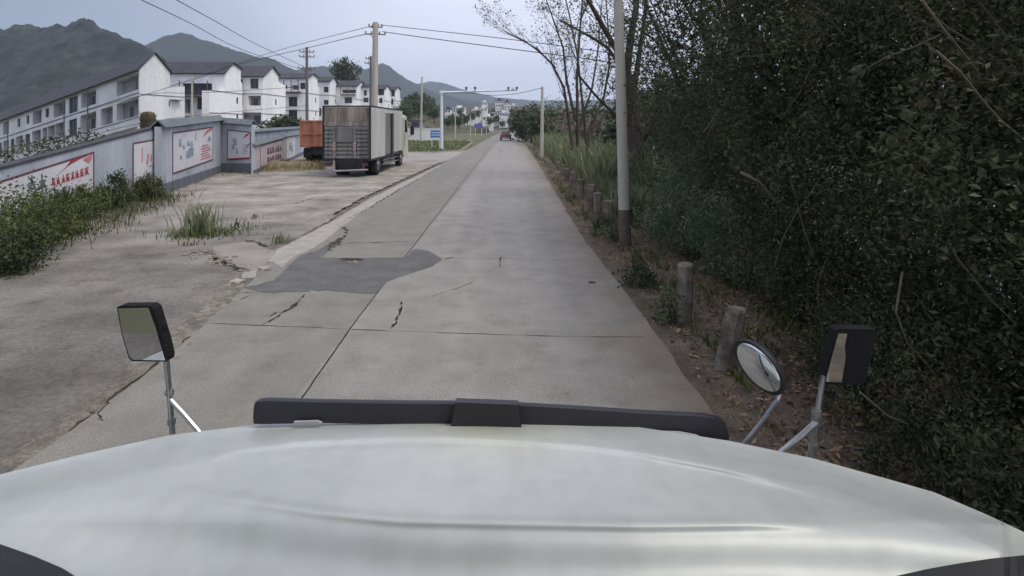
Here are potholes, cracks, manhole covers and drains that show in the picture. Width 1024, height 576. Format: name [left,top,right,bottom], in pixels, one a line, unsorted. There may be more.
crack [205,249,243,271]
crack [390,302,403,329]
crack [317,168,437,251]
crack [69,332,197,431]
crack [226,292,305,326]
